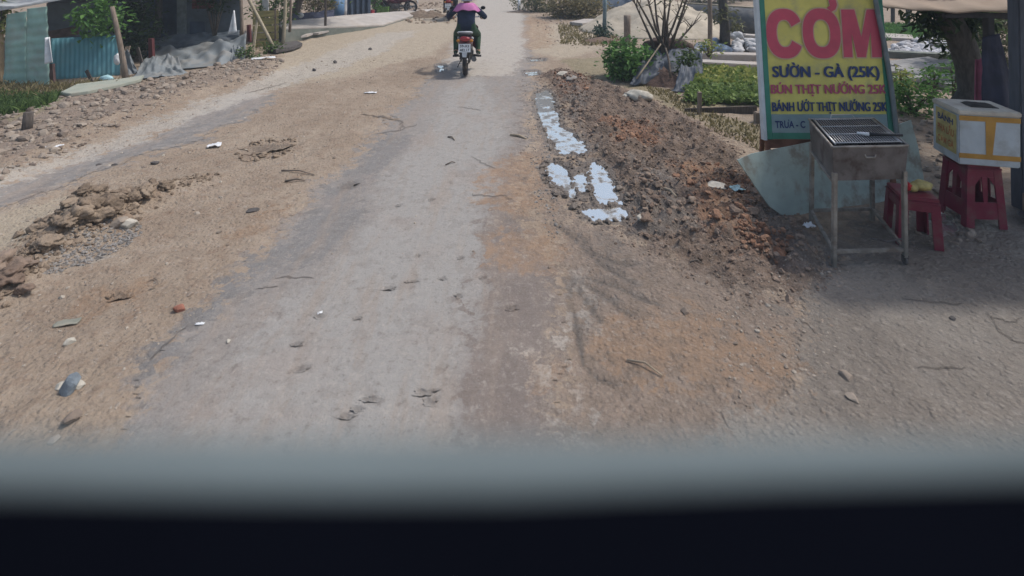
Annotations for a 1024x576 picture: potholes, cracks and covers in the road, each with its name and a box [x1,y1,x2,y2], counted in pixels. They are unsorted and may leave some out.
crack [365,114,417,133]
crack [990,316,1024,343]
crack [150,324,189,359]
pothole [236,142,297,155]
